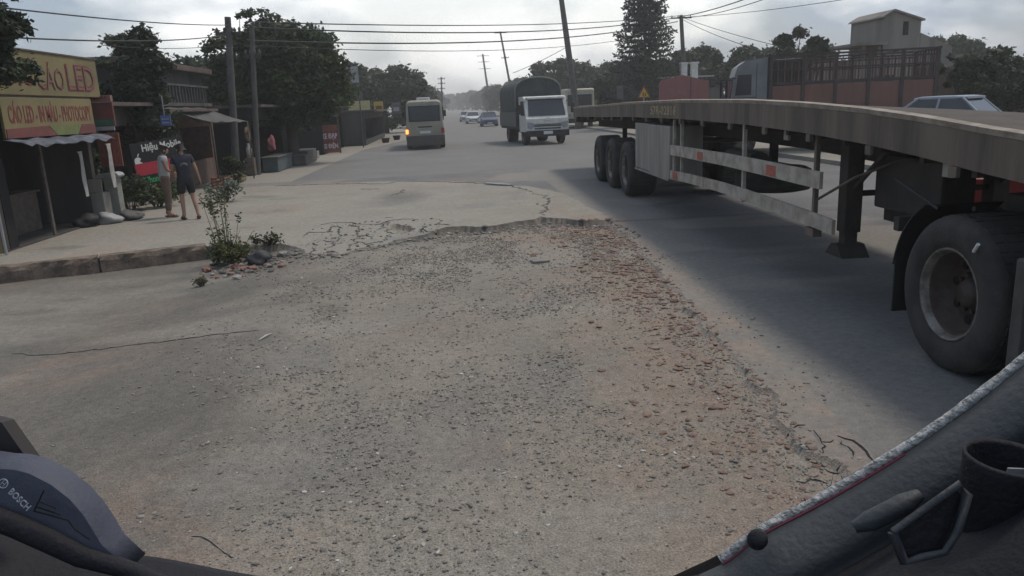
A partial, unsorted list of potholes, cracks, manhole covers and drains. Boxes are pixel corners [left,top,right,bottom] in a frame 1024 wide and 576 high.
crack [303,217,450,254]
crack [784,424,875,491]
crack [14,330,255,355]
pothole [136,216,851,576]
